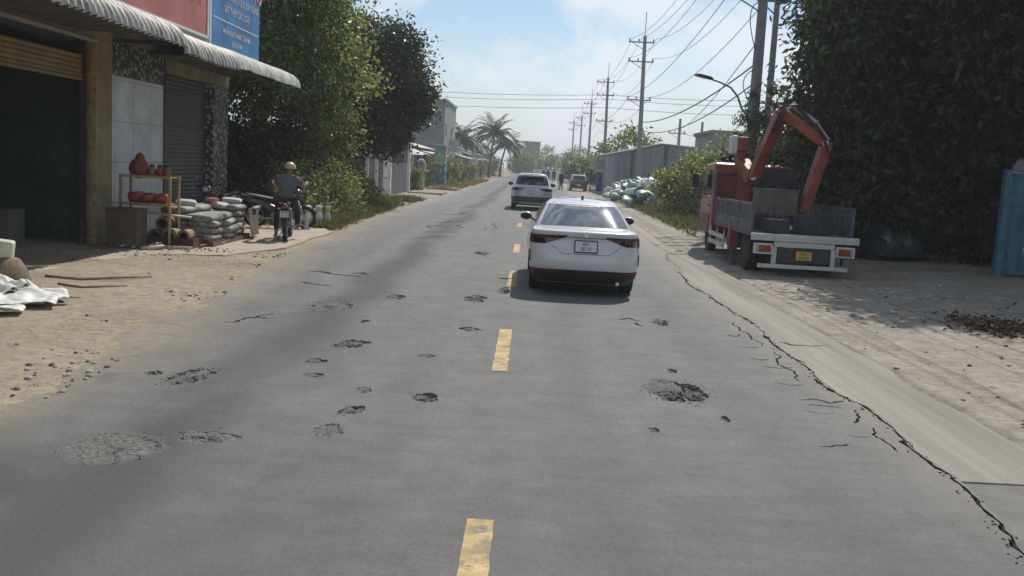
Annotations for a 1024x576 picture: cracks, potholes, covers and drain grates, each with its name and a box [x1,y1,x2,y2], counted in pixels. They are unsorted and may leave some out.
pothole [463,295,488,303]
pothole [155,367,221,388]
pothole [337,405,365,416]
pothole [329,339,372,349]
pothole [307,300,364,312]
pothole [311,423,344,438]
pothole [640,378,716,406]
pothole [412,392,441,403]
crack [234,314,271,322]
crack [665,257,1024,564]
crack [303,271,368,286]
pothole [176,428,242,444]
